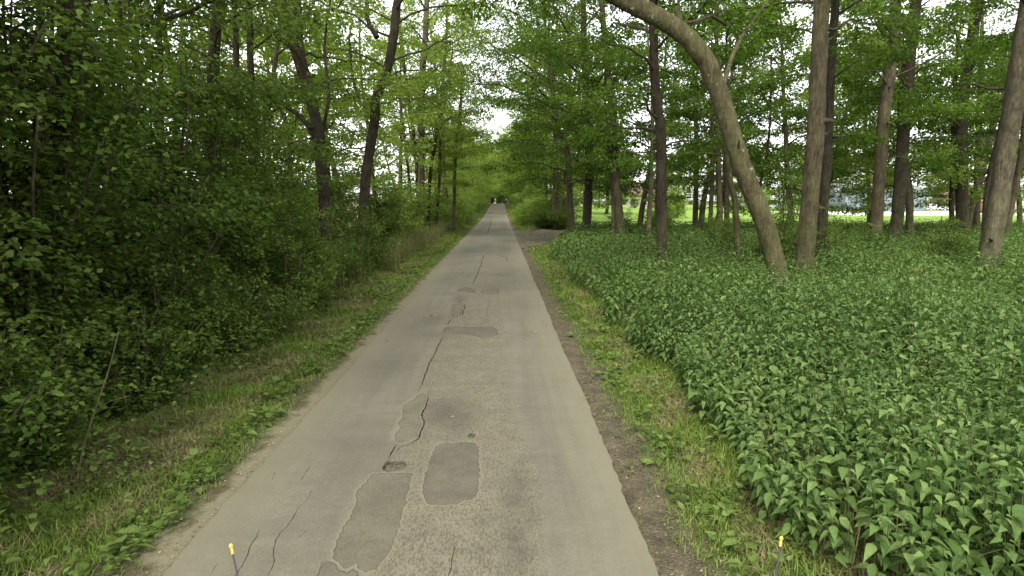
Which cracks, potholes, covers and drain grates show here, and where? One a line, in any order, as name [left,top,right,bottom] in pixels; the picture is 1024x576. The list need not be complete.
pothole [382,461,407,472]
crack [388,395,429,459]
crack [235,467,311,576]
